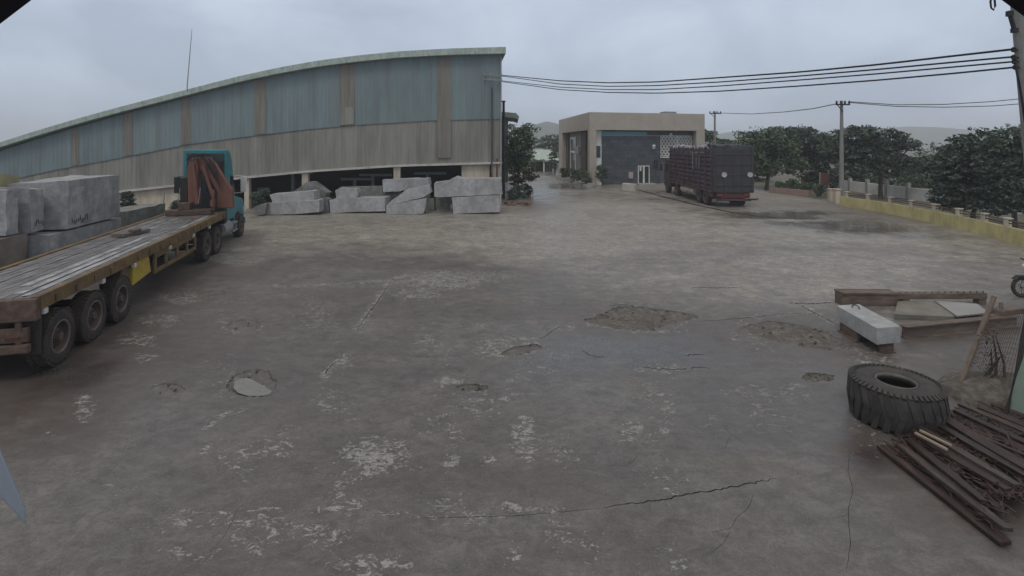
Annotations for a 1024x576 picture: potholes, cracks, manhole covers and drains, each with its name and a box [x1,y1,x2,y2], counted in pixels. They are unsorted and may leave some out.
crack [838,448,853,573]
pothole [226,369,277,397]
pothole [584,305,698,331]
pothole [802,372,835,383]
pothole [739,320,847,351]
pothole [226,319,262,332]
pothole [500,344,542,356]
crack [640,354,706,370]
pothole [150,383,185,397]
crack [434,478,776,550]
